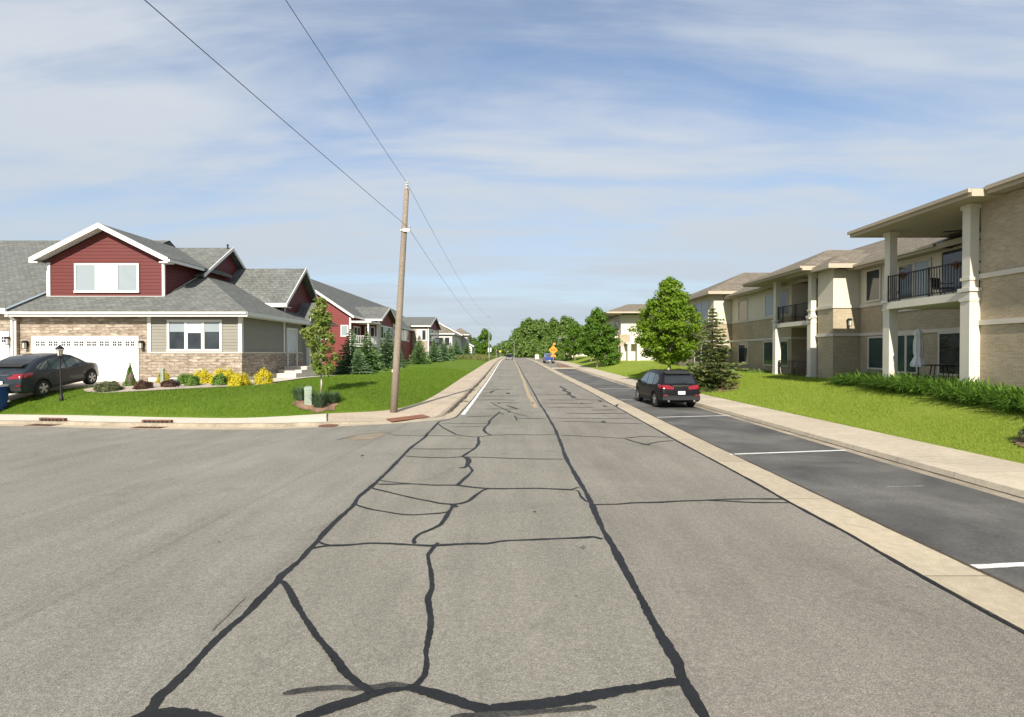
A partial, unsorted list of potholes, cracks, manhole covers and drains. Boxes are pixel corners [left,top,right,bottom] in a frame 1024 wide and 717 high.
drain grate [23,417,67,426]
crack [462,390,540,427]
drain grate [132,420,173,429]
crack [410,448,529,459]
crack [560,386,673,445]
